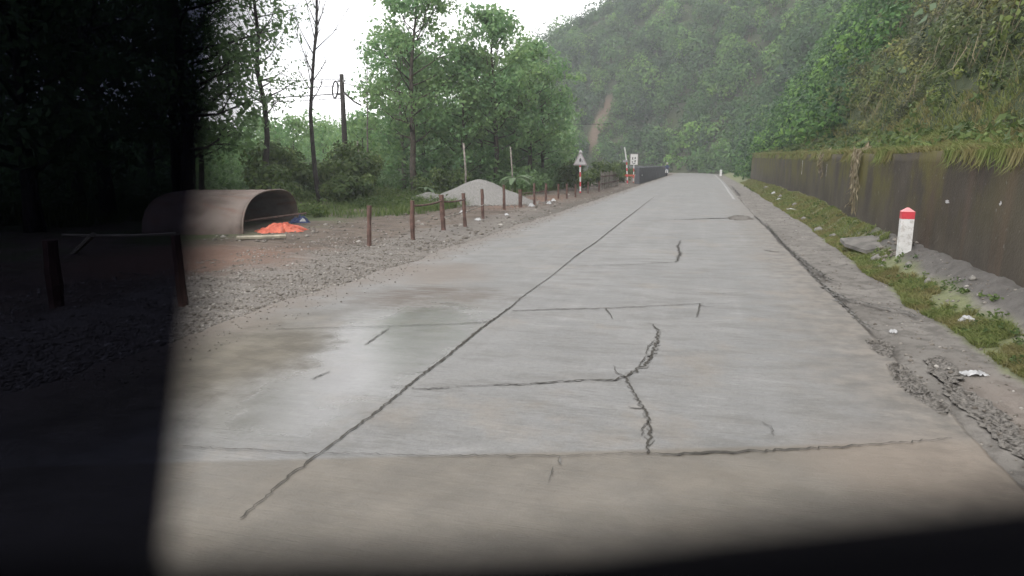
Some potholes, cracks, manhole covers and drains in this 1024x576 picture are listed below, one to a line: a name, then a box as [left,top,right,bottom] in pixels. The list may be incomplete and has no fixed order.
pothole [865,338,895,358]
pothole [941,382,1024,460]
crack [390,308,661,452]
pothole [923,355,965,384]
pothole [886,362,951,416]
